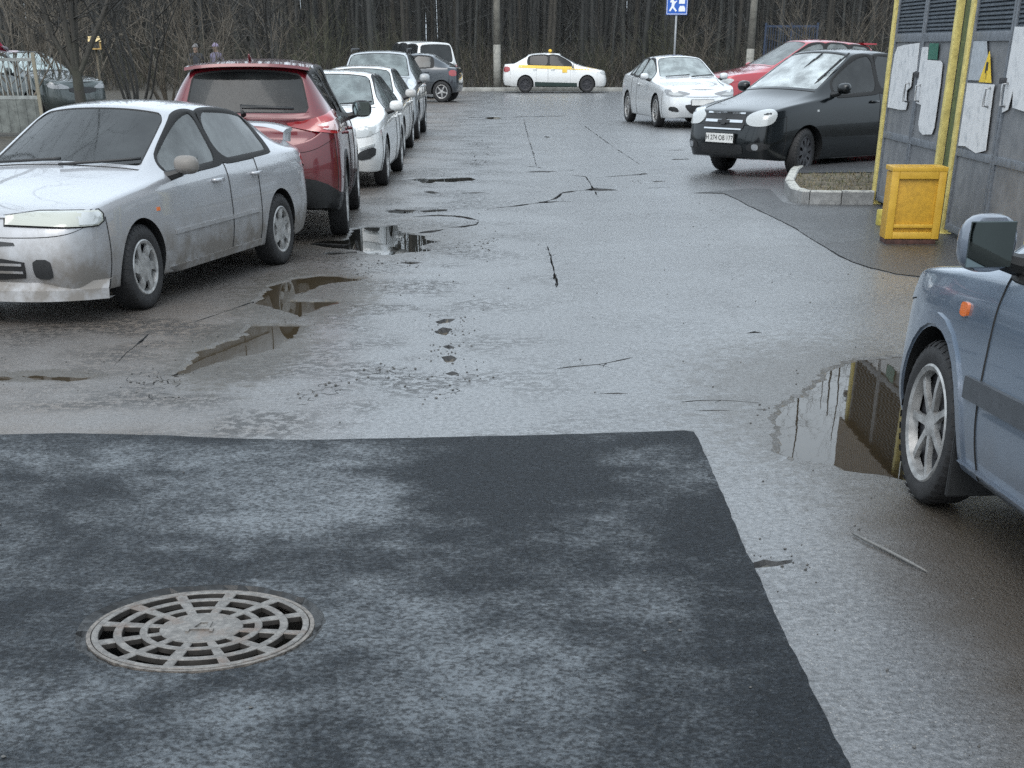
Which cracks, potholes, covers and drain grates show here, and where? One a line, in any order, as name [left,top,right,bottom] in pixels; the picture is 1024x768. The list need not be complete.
manhole cover [86,590,315,673]
pothole [168,323,311,379]
crack [118,334,182,400]
crack [416,215,492,252]
pothole [767,354,906,481]
crack [557,357,633,369]
pothole [250,274,368,319]
crack [471,166,664,208]
pothole [307,223,444,255]
crack [541,247,558,288]
